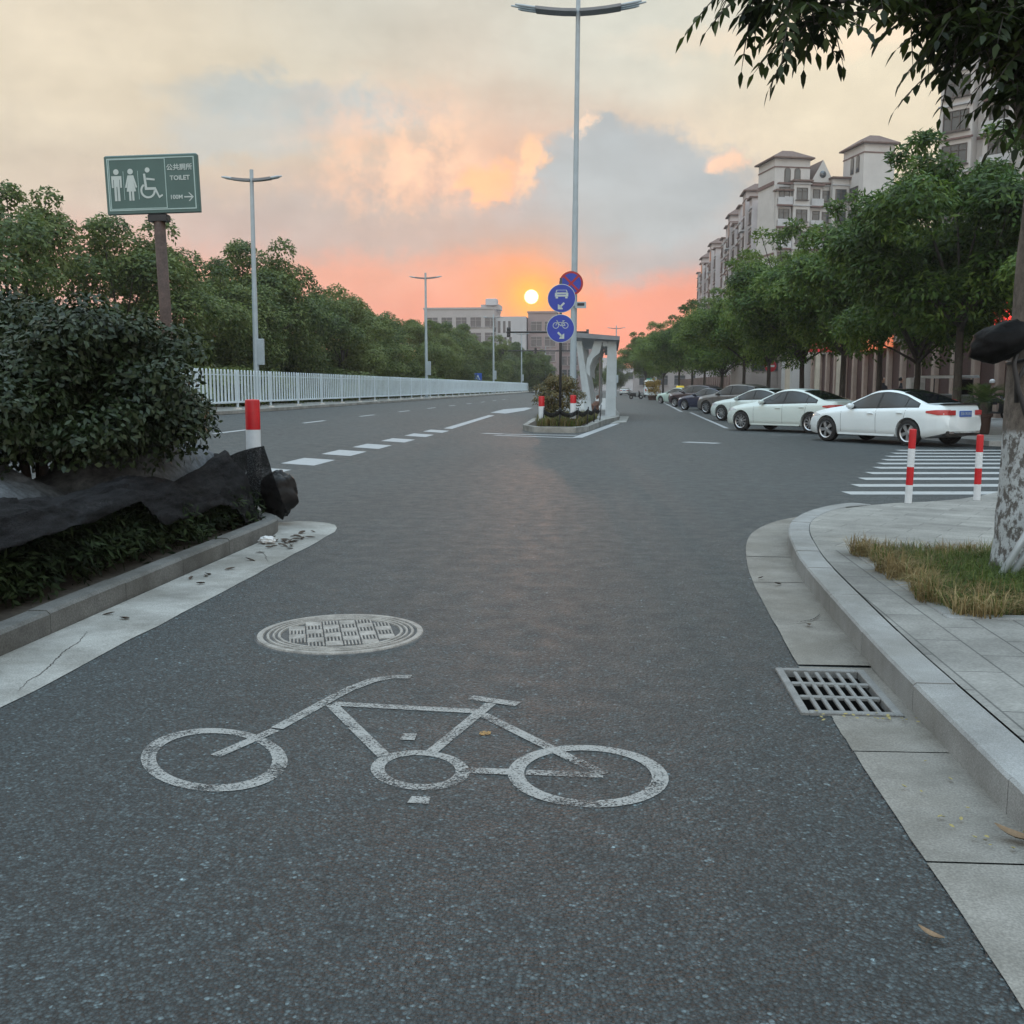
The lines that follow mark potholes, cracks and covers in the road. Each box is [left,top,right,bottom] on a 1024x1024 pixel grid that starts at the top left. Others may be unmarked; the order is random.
manhole cover [254,614,425,656]
crack [20,631,87,688]
drain grate [775,667,904,718]
